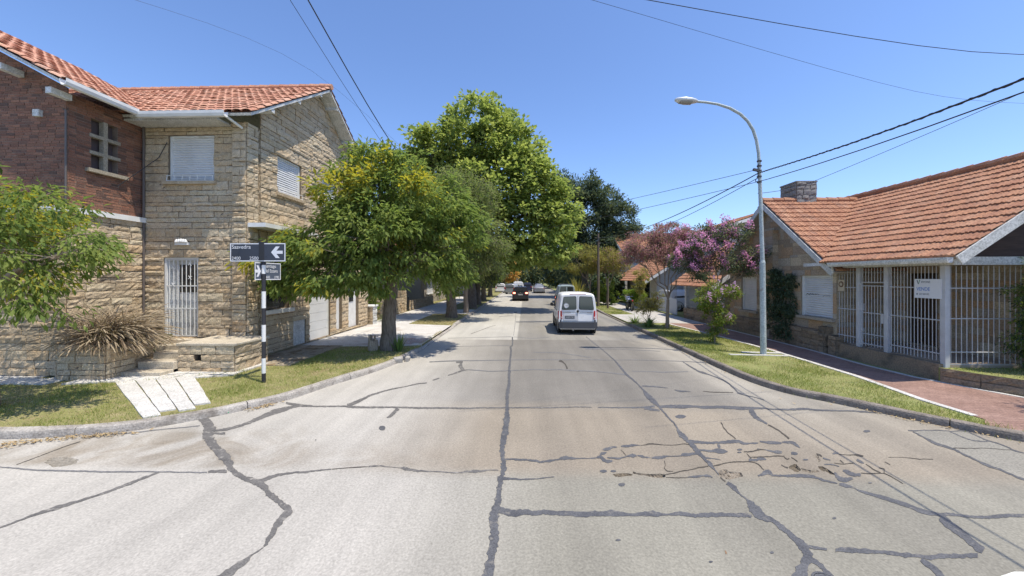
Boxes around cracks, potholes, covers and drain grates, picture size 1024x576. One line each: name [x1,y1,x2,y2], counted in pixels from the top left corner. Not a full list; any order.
crack [641,424,798,482]
crack [816,453,933,483]
